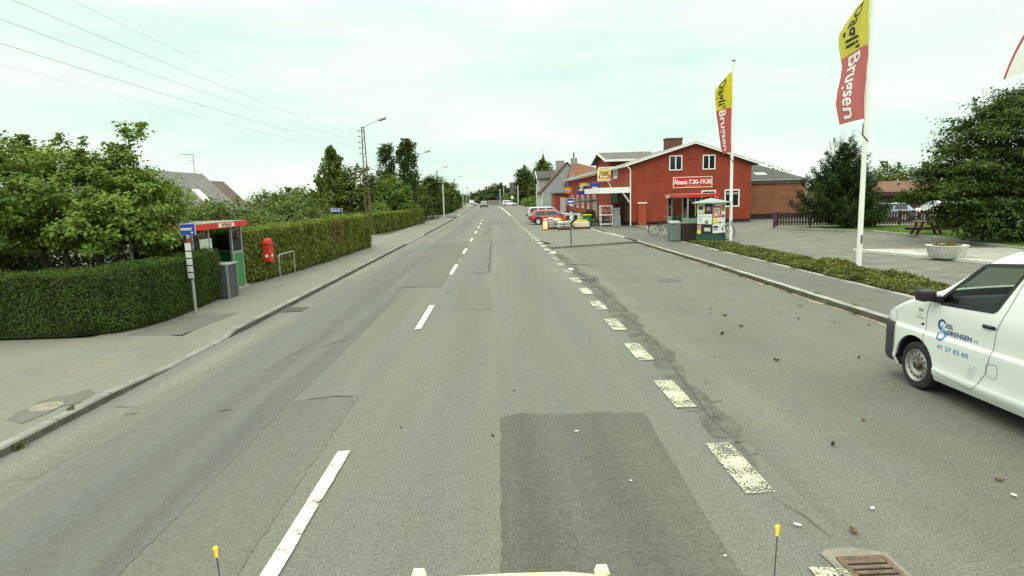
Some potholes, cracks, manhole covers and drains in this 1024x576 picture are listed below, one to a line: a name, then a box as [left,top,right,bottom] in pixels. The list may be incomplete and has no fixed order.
drain grate [821,547,912,576]
